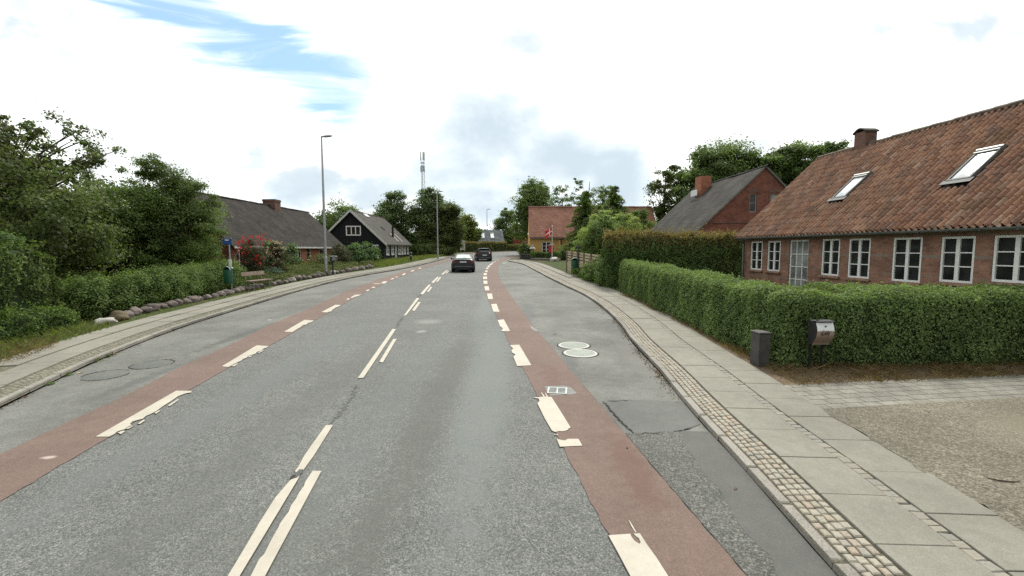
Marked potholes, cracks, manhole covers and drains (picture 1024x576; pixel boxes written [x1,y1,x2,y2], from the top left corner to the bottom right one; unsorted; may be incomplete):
manhole cover [562,349,599,358]
manhole cover [80,369,129,381]
manhole cover [128,359,175,369]
